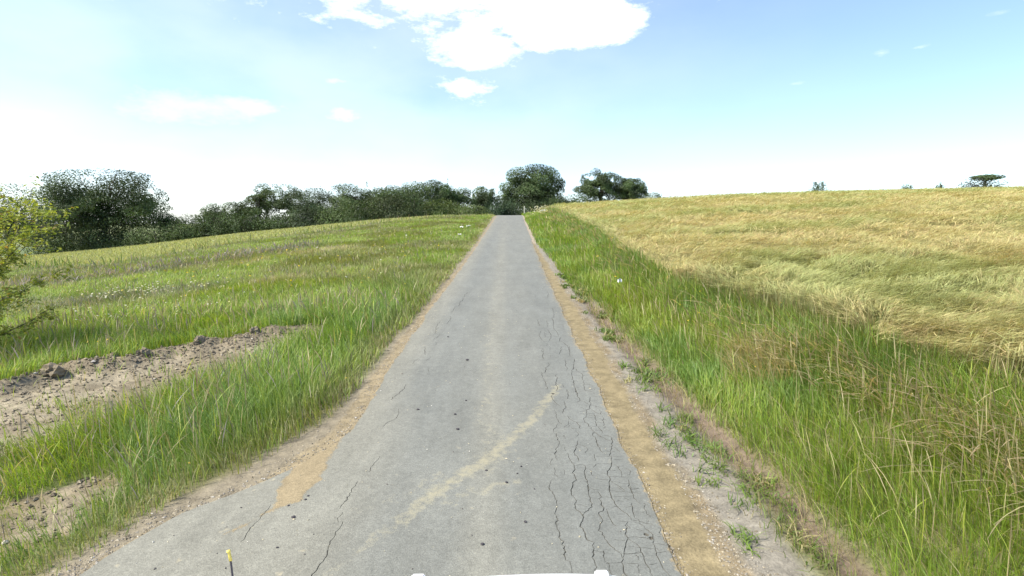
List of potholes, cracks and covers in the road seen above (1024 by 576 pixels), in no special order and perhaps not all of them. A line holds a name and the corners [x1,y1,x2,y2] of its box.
crack [311,457,380,576]
crack [537,292,672,576]
